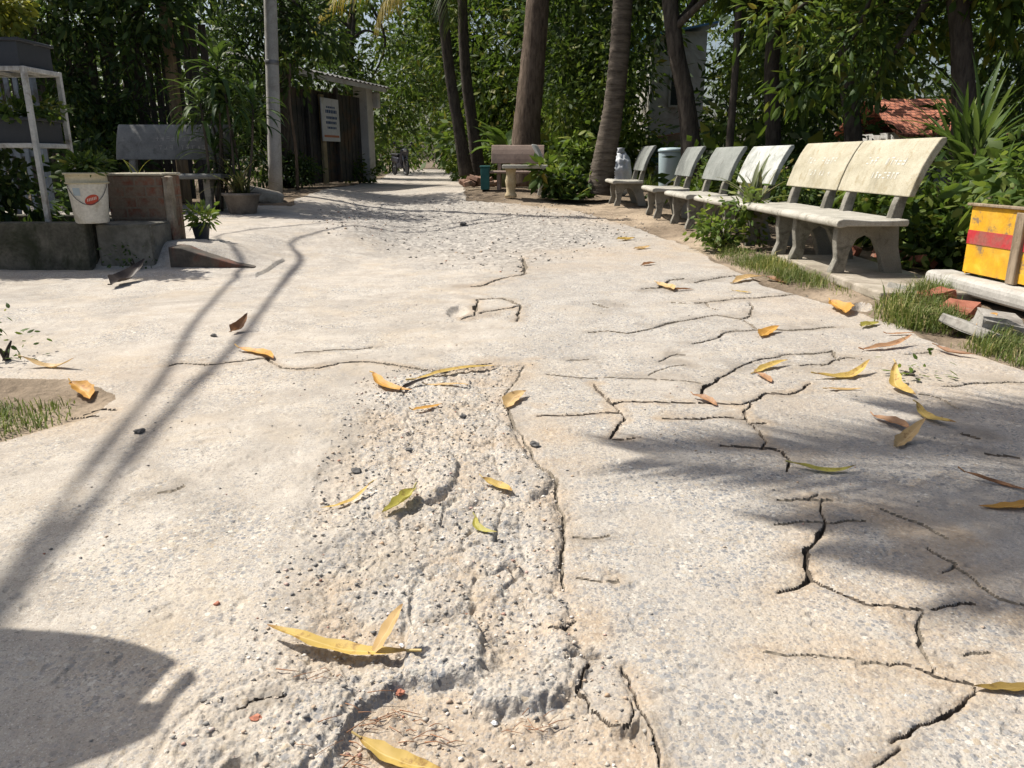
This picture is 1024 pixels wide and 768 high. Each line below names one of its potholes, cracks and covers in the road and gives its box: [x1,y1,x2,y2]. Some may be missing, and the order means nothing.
pothole [425,488,450,507]
crack [763,493,1024,768]
pothole [320,673,655,768]
crack [461,255,528,322]
crack [960,432,1020,459]
crack [537,275,862,472]
crack [168,346,492,374]
crack [548,620,661,768]
pothole [487,592,549,678]
